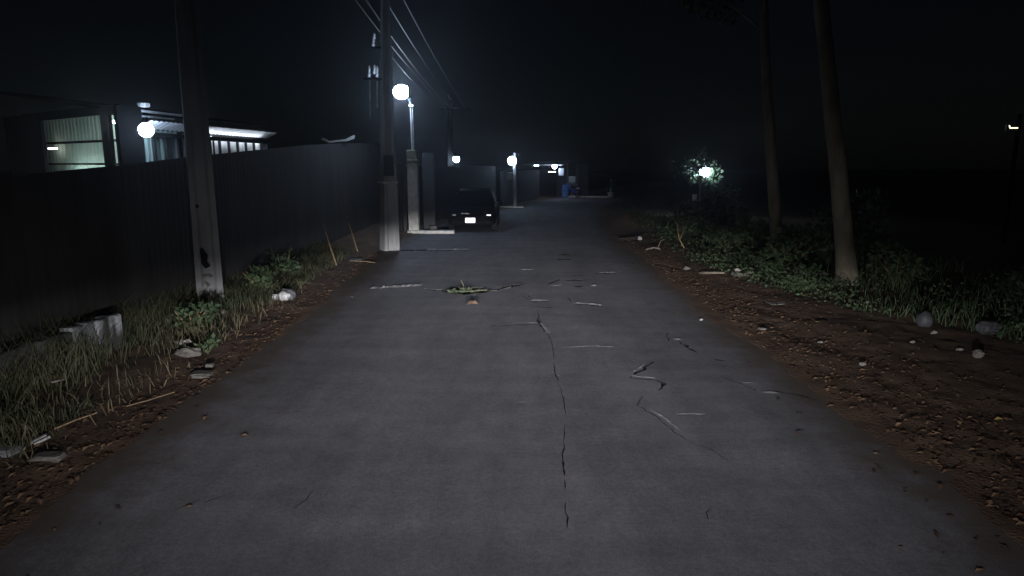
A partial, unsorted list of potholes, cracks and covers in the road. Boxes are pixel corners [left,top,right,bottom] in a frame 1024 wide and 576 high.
pothole [441,286,493,295]
crack [490,254,727,526]
